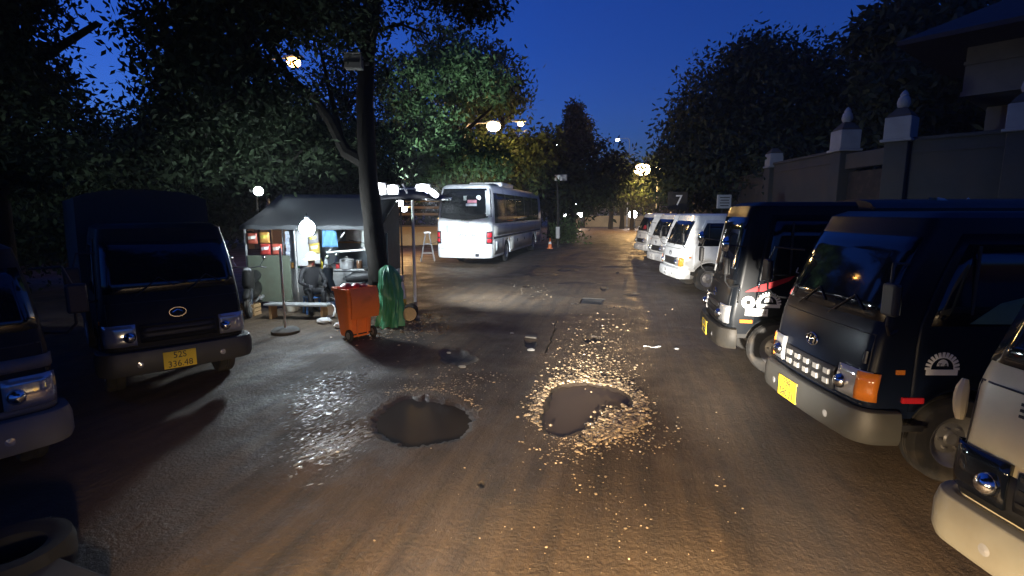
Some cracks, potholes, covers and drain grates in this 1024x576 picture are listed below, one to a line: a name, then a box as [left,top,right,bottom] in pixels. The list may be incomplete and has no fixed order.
pothole [539,382,633,437]
pothole [365,393,482,450]
crack [544,322,557,357]
pothole [438,347,481,367]
